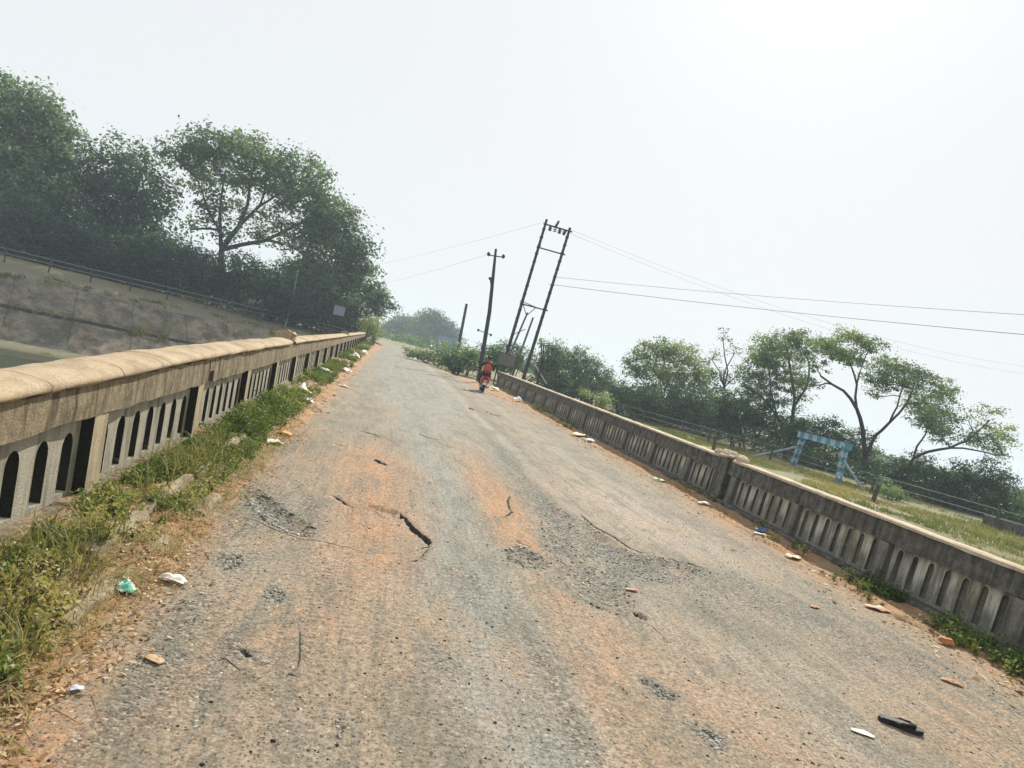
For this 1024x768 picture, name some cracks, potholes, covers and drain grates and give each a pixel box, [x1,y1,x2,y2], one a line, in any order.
pothole [687,721,725,750]
pothole [641,679,679,702]
pothole [536,495,711,616]
pothole [261,588,288,604]
crack [576,514,650,556]
pothole [502,545,552,569]
pothole [221,553,244,570]
crack [500,496,517,519]
pothole [244,487,319,537]
crack [208,626,317,681]
crack [244,495,437,562]
